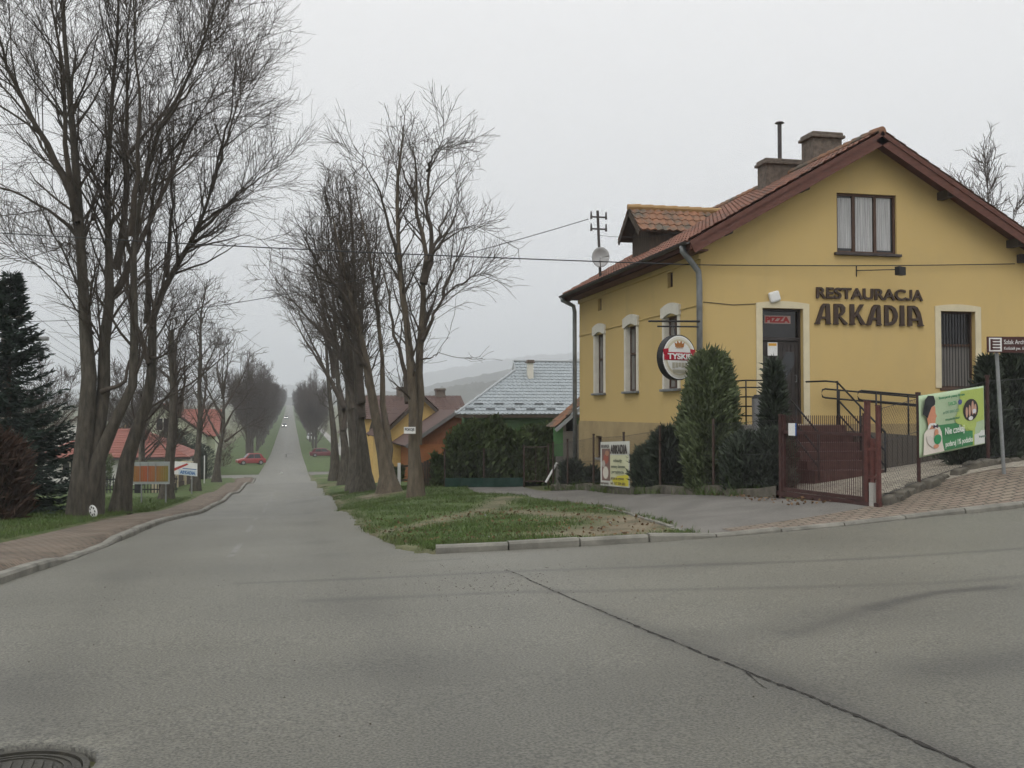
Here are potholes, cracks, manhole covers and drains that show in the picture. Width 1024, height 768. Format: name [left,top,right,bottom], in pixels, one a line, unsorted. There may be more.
manhole cover [0,749,90,768]
